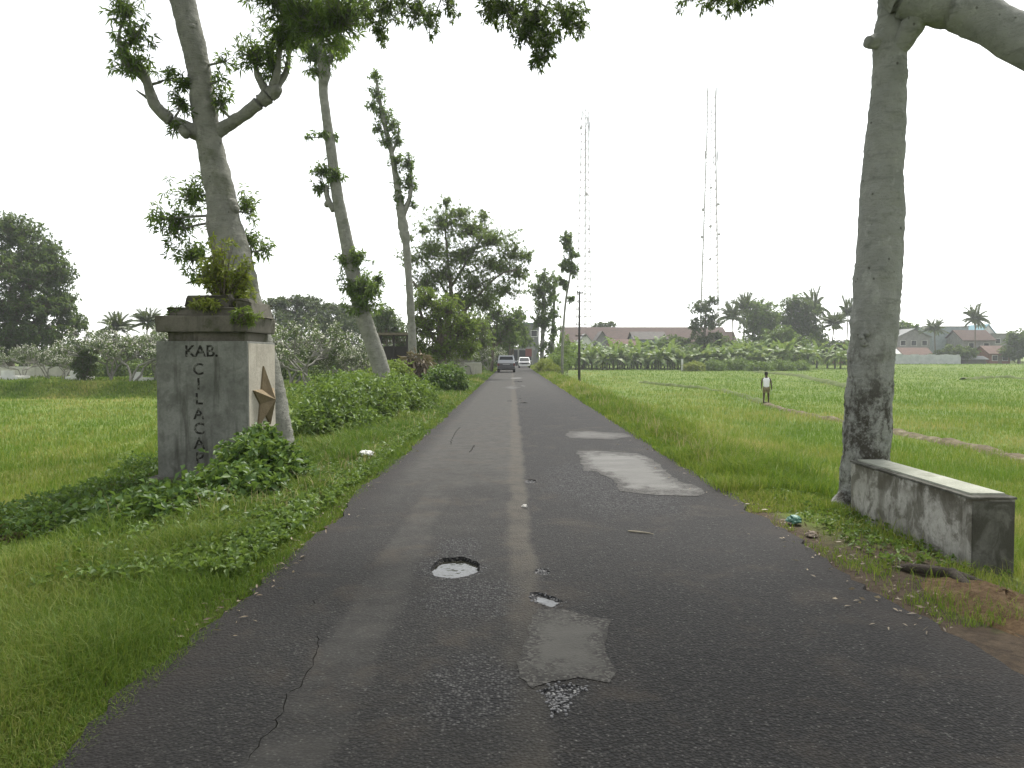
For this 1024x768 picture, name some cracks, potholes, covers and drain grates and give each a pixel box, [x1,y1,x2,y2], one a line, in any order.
pothole [528,592,563,608]
pothole [536,681,588,718]
pothole [429,555,487,580]
crack [248,633,320,761]
